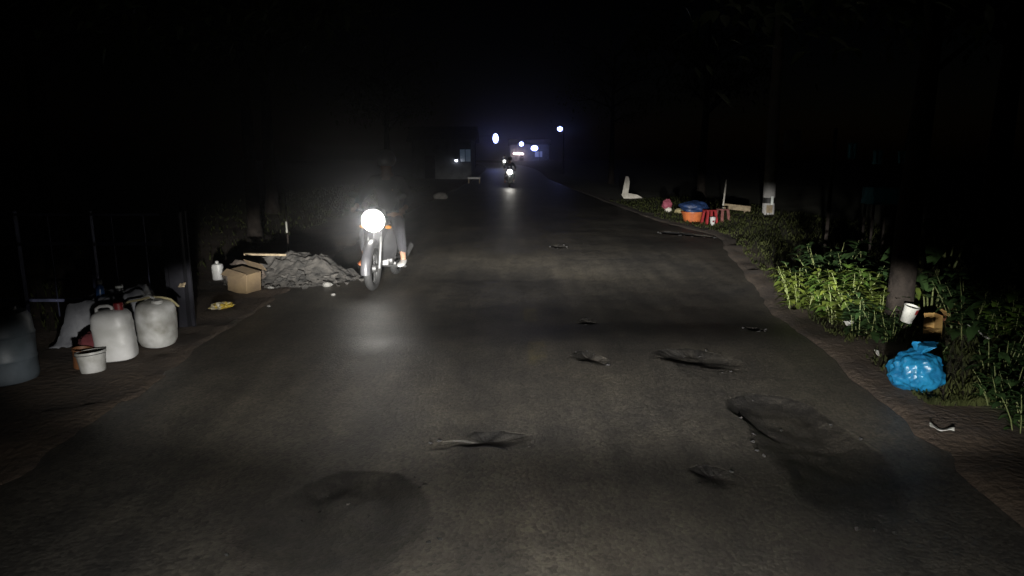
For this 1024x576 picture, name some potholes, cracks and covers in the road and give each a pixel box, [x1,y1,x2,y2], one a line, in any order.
pothole [686,464,746,490]
pothole [648,348,749,373]
pothole [221,470,442,576]
pothole [725,393,918,535]
pothole [423,430,538,451]
pothole [570,350,611,366]
